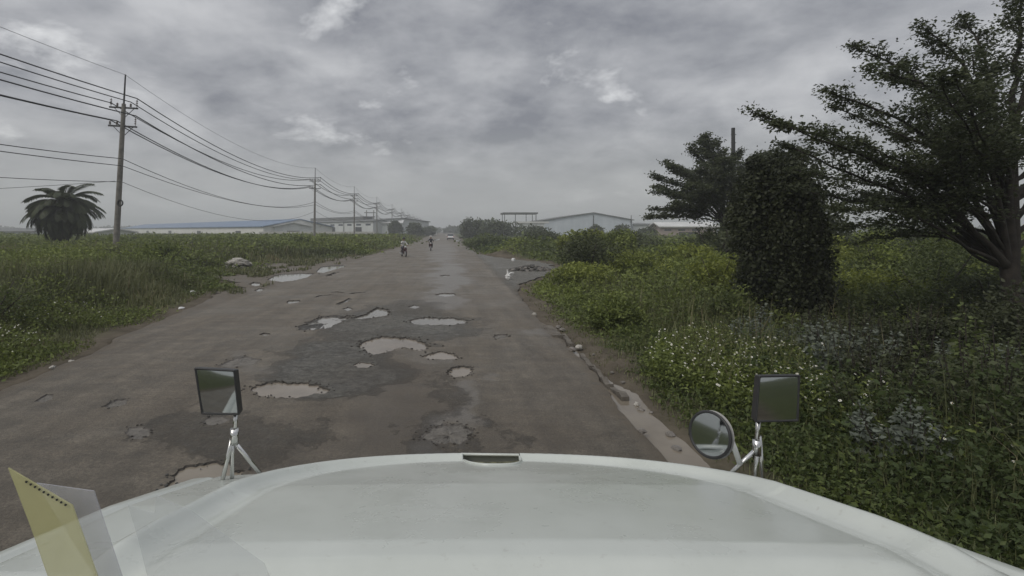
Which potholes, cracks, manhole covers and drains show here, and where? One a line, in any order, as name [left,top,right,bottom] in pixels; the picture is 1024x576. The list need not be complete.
pothole [403,316,474,326]
pothole [295,315,356,332]
pothole [351,307,391,319]
pothole [155,459,251,490]
pothole [412,420,479,448]
pothole [351,334,444,356]
pothole [241,380,335,399]
pothole [443,365,474,379]
pothole [125,424,153,440]
pothole [420,351,463,360]
